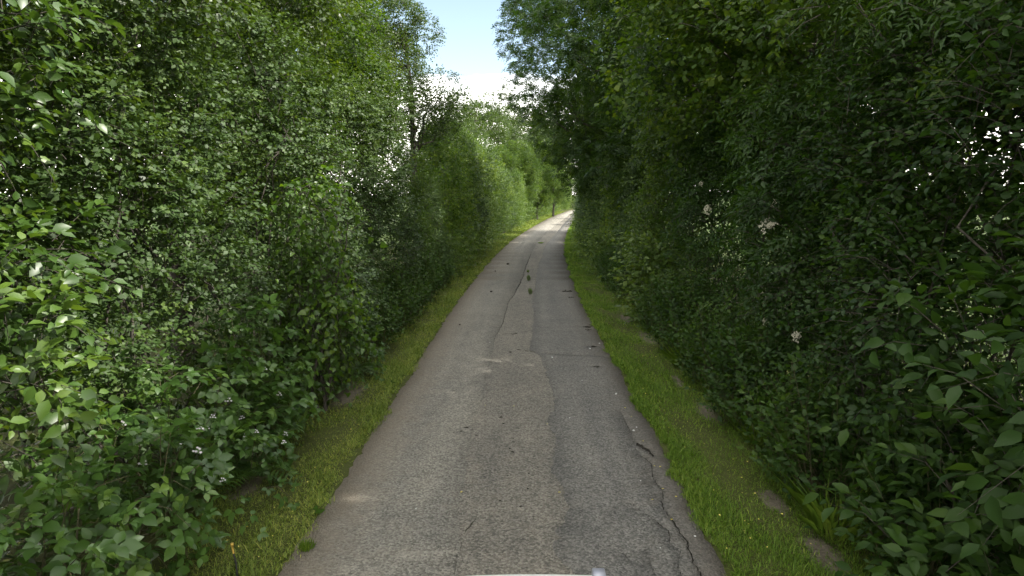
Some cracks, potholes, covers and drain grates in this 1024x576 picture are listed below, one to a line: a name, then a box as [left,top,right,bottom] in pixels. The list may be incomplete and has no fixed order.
crack [623,417,701,576]
